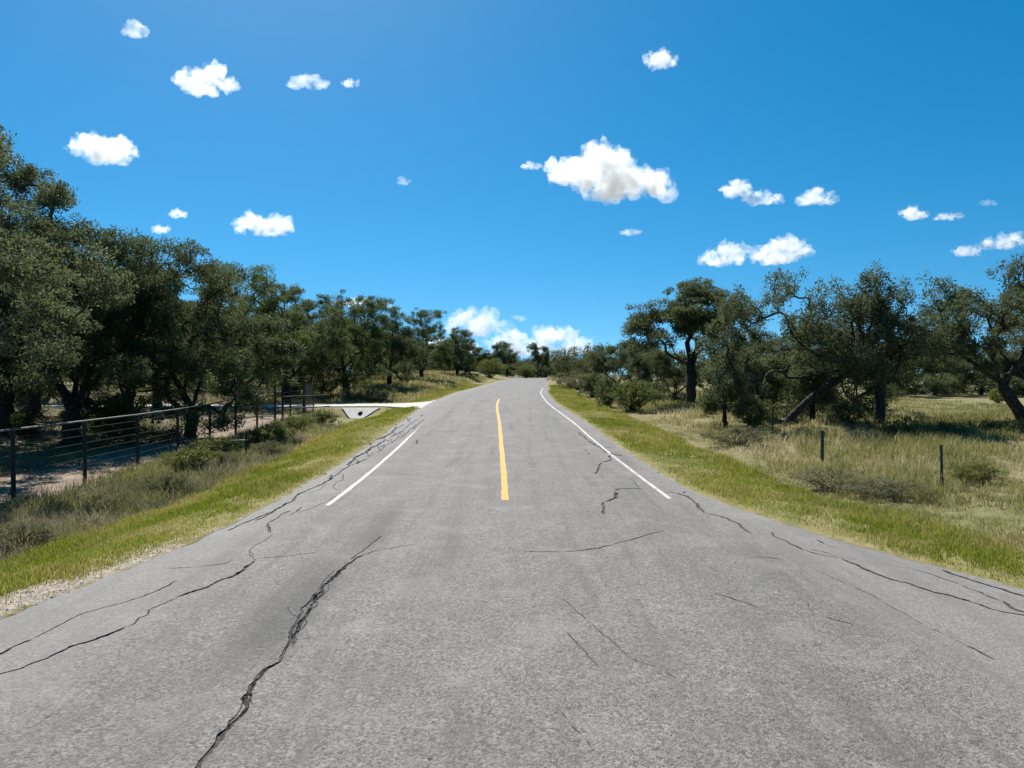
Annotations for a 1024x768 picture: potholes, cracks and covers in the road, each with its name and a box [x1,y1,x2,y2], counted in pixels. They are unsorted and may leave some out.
crack [564,599,674,678]
crack [670,492,750,533]
crack [578,432,644,515]
crack [0,415,424,768]
crack [528,531,662,552]
crack [757,532,1024,659]
